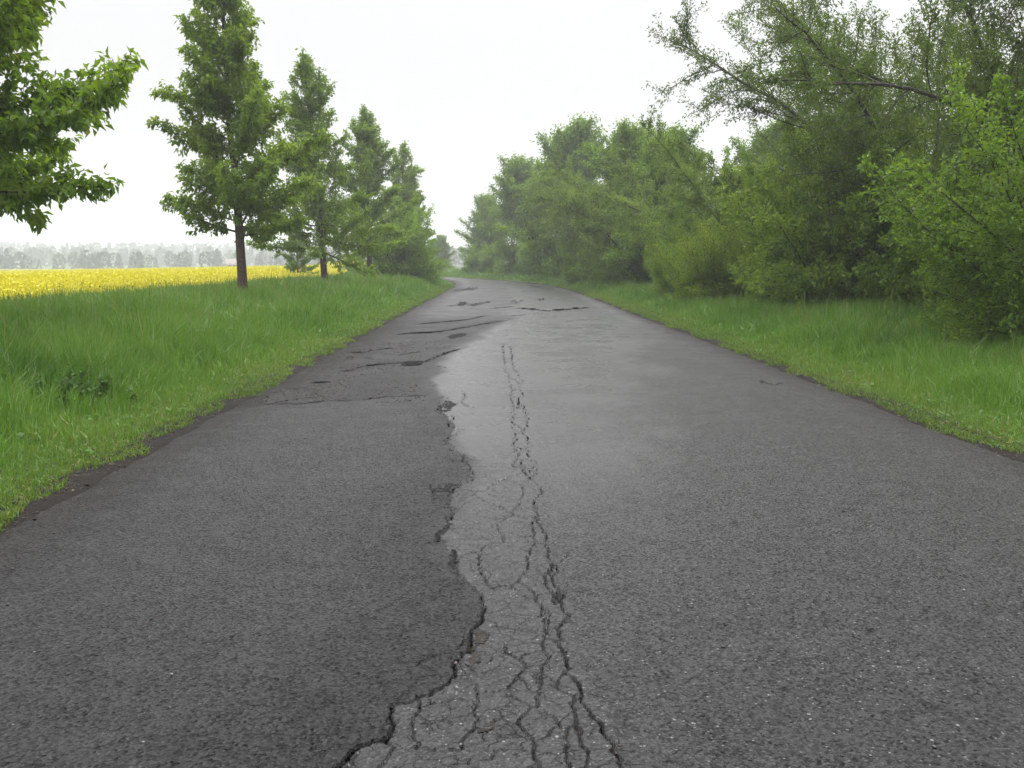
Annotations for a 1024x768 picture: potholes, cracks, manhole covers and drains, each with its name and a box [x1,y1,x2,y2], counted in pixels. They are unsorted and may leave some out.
crack [313,291,588,383]
crack [492,346,613,768]
